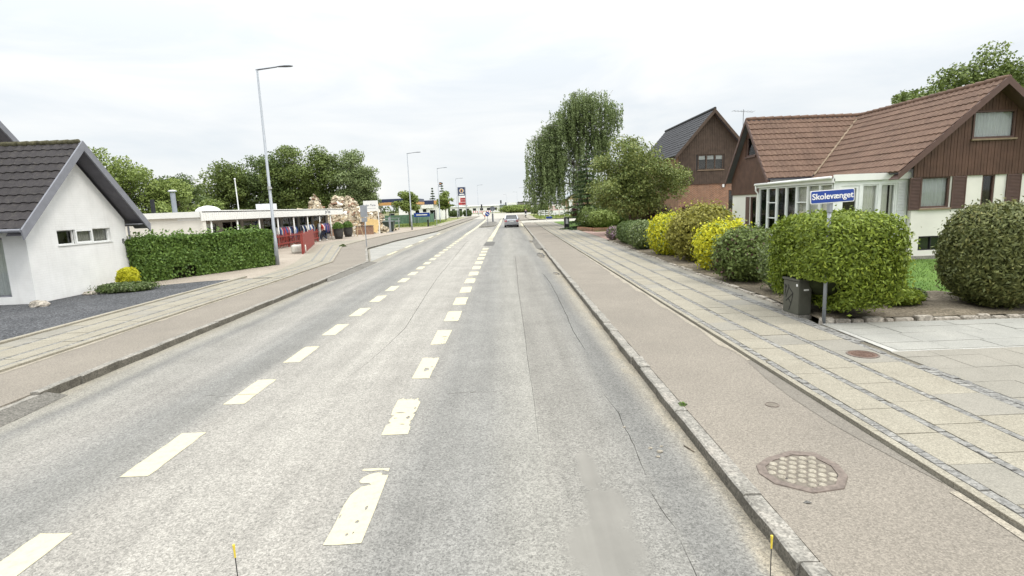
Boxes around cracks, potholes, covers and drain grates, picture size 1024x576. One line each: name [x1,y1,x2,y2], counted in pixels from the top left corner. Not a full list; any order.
manhole cover [756,451,848,494]
manhole cover [846,350,880,359]
crack [606,397,697,576]
